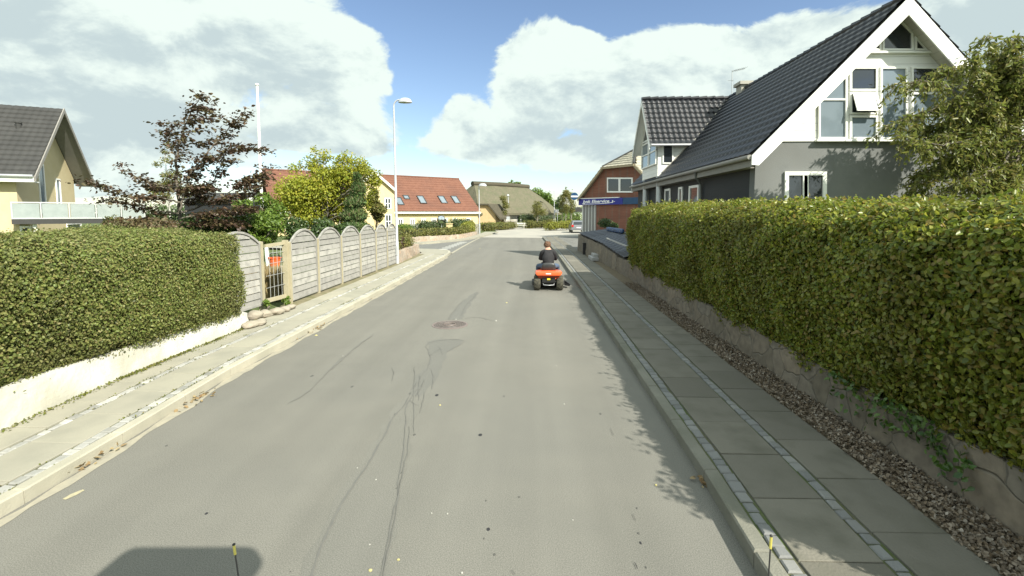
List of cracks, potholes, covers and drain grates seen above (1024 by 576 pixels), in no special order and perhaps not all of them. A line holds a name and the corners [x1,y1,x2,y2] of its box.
manhole cover [432,320,468,329]
crack [310,339,465,576]
